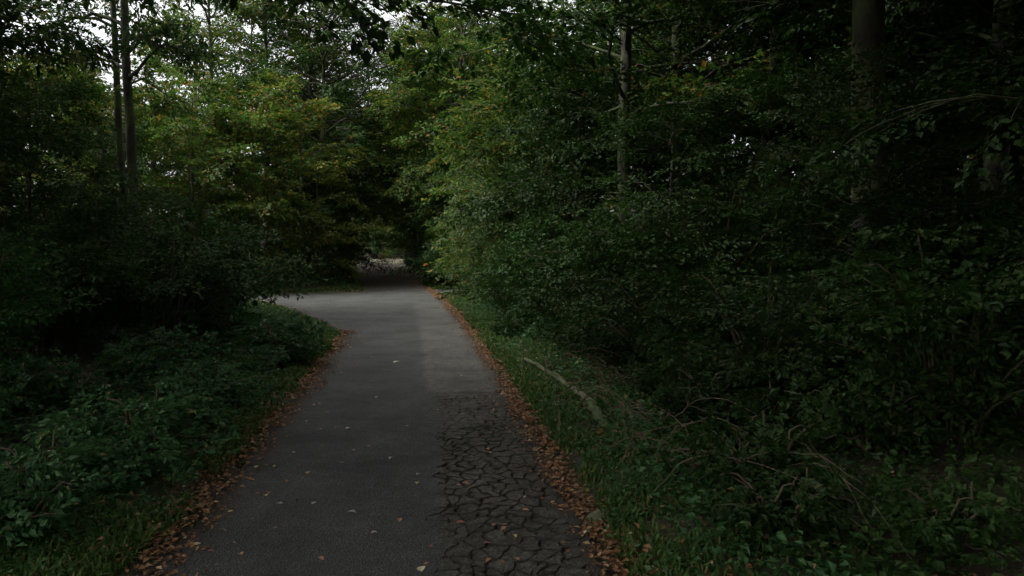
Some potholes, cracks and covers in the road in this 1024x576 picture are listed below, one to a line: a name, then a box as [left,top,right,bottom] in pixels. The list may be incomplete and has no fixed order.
crack [425,394,601,576]
